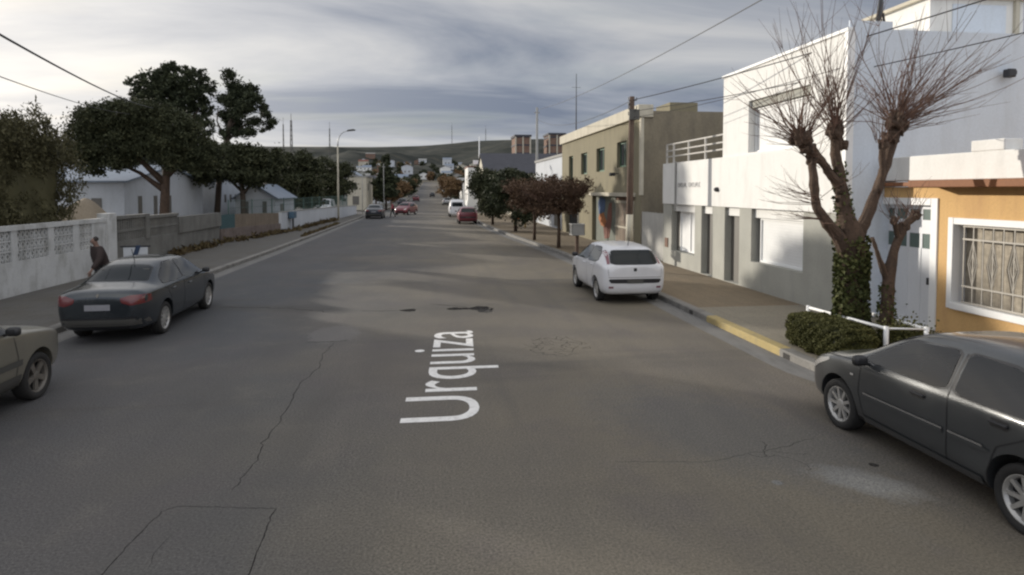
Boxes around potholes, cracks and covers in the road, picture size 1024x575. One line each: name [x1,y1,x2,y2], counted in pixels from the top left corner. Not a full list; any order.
crack [102,340,349,575]
crack [617,438,814,468]
